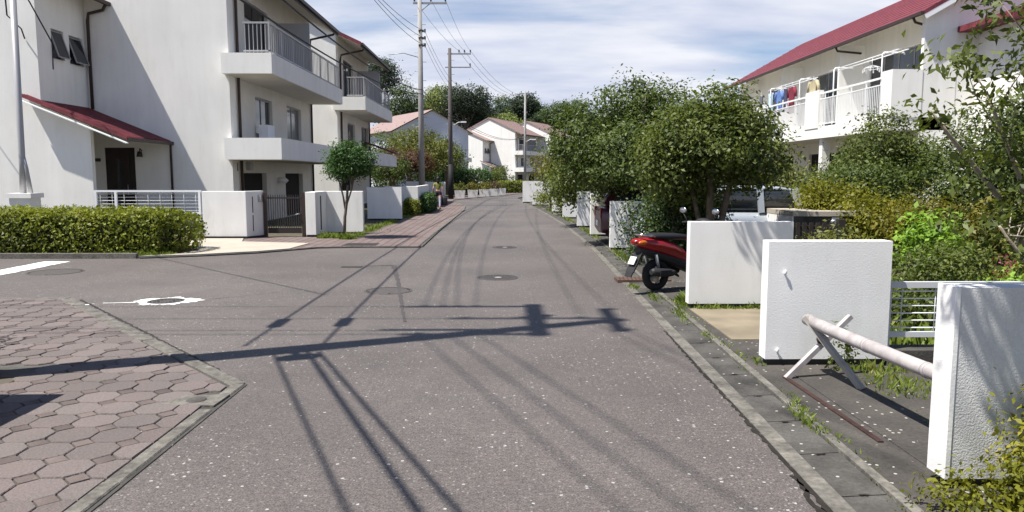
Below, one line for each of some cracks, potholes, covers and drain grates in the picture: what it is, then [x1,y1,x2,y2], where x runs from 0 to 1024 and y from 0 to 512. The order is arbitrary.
manhole cover [364,287,412,295]
